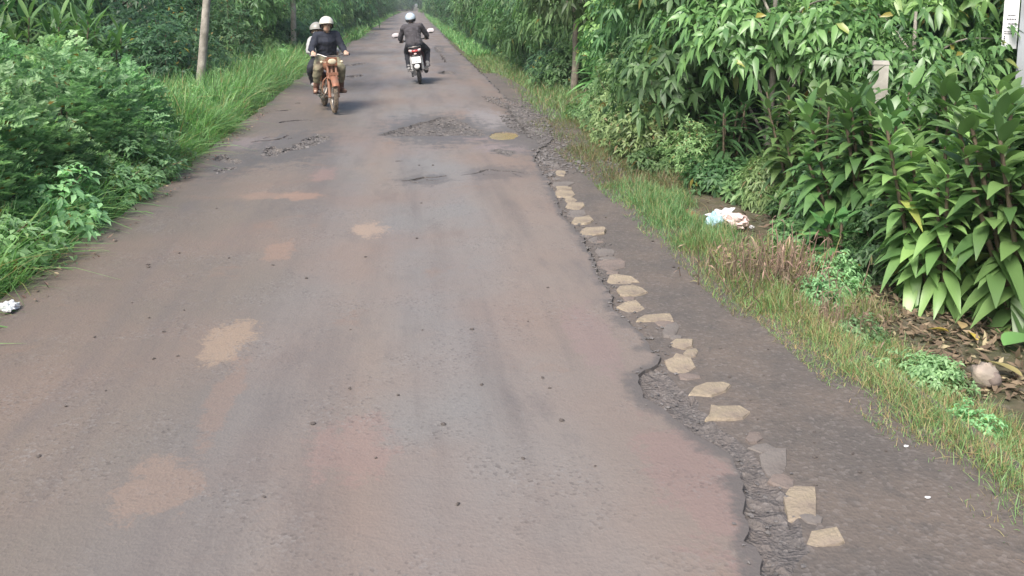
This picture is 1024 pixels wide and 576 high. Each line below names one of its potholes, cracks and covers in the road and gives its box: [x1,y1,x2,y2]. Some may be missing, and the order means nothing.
pothole [380,116,486,137]
pothole [210,154,243,164]
pothole [260,134,330,157]
